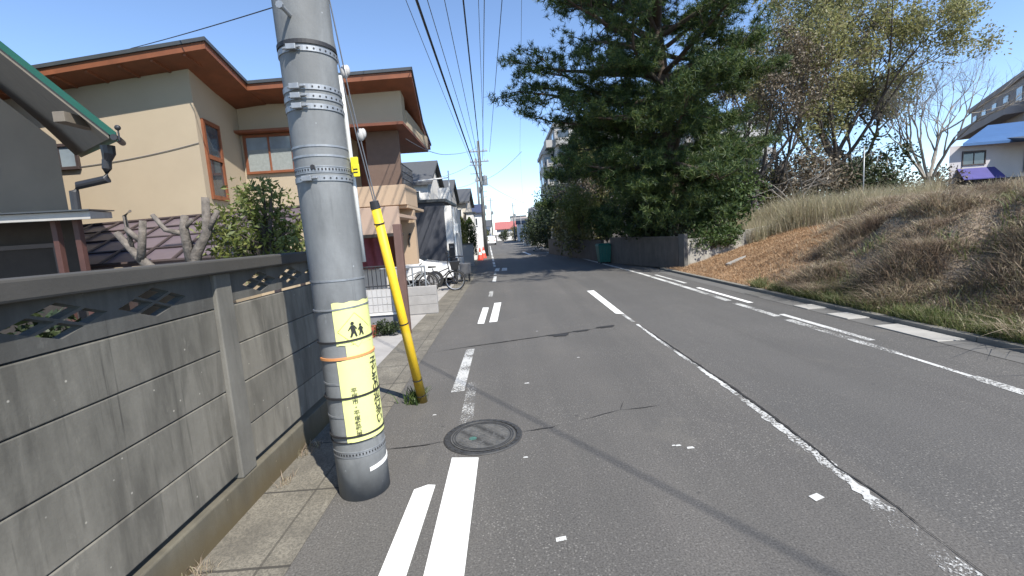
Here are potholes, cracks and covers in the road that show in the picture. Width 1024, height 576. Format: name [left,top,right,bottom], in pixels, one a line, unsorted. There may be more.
manhole cover [444,419,522,455]
